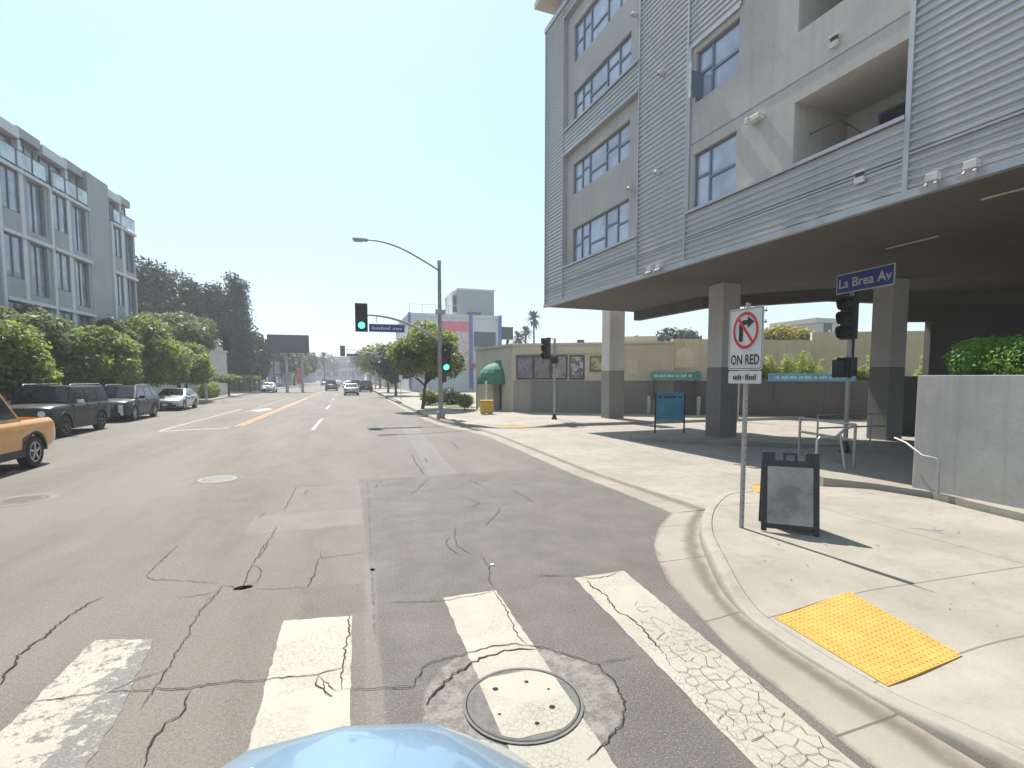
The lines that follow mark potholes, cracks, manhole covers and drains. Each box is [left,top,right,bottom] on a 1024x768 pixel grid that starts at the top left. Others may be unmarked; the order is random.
crack [0,528,638,767]
manhole cover [463,667,584,744]
manhole cover [0,493,60,507]
manhole cover [190,474,245,484]
